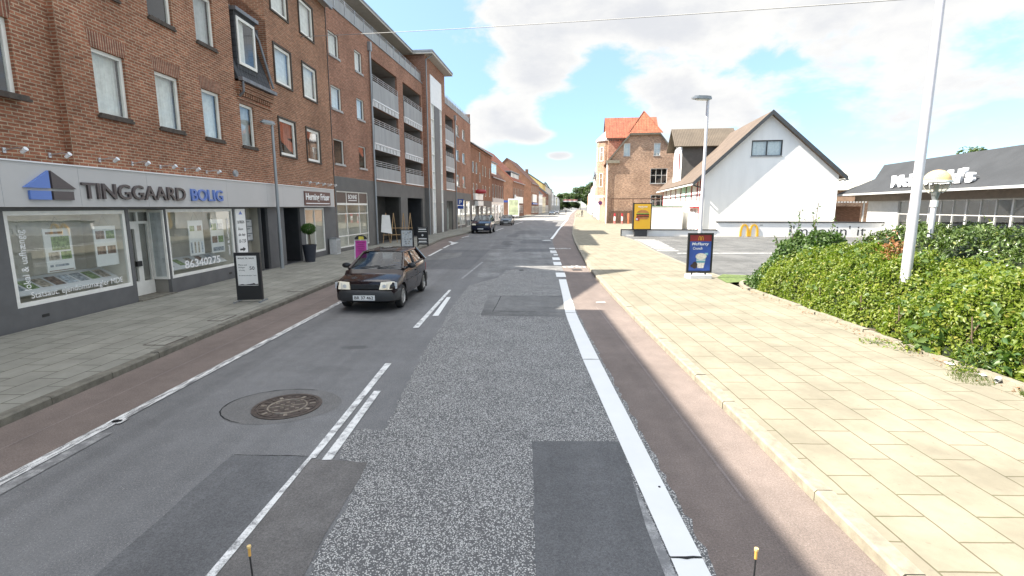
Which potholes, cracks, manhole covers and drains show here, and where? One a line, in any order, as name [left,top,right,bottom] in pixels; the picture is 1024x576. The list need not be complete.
manhole cover [251,394,322,420]
